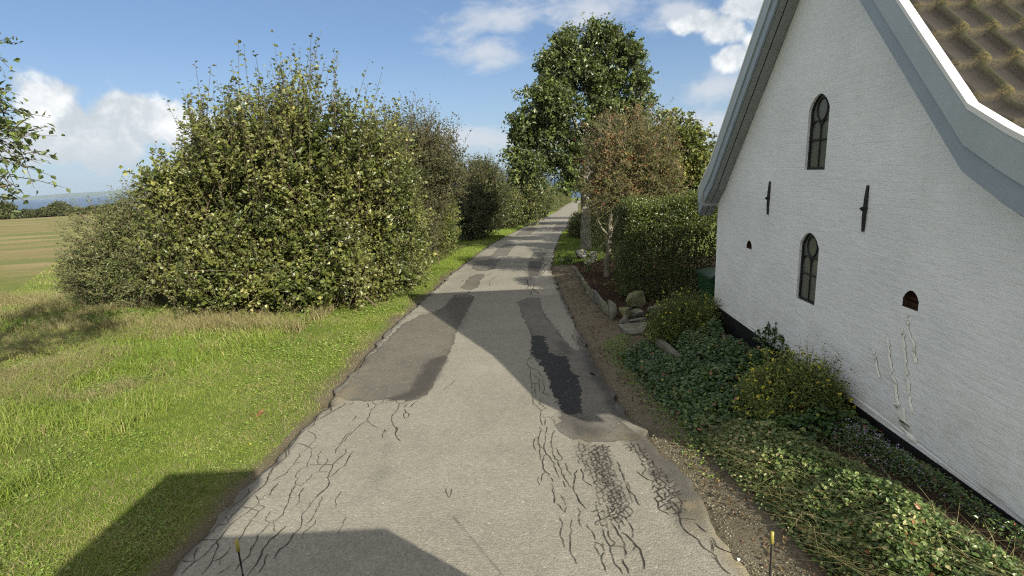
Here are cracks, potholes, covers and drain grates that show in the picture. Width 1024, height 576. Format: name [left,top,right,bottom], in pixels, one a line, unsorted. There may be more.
crack [169,399,415,575]
crack [527,357,754,574]
